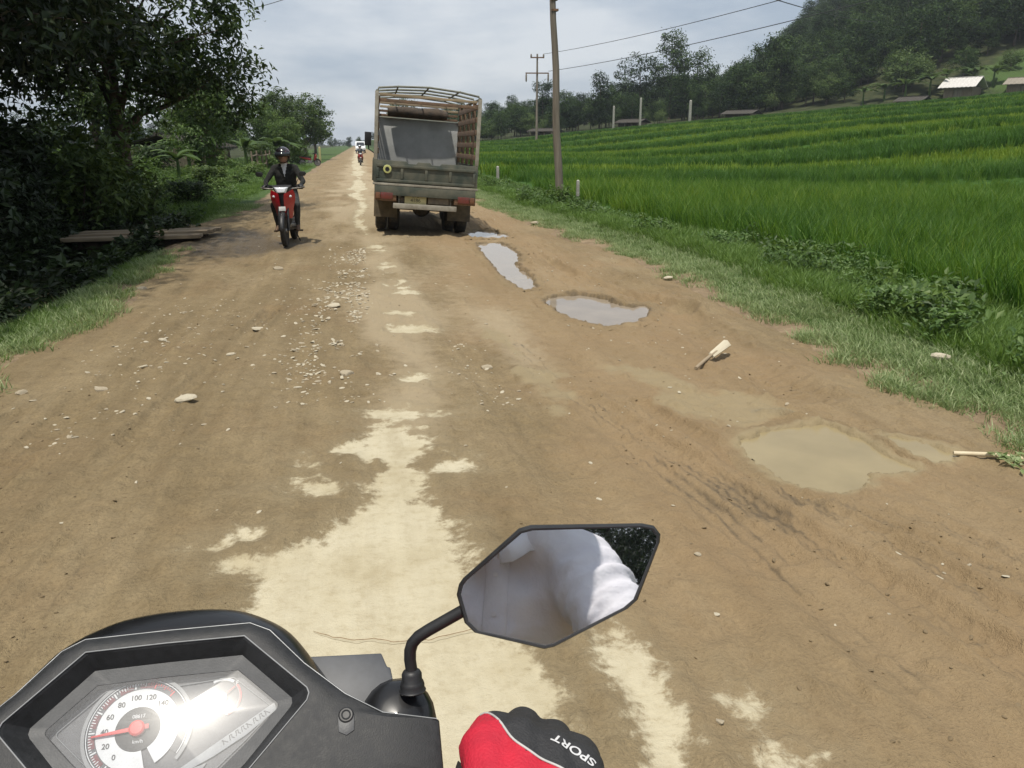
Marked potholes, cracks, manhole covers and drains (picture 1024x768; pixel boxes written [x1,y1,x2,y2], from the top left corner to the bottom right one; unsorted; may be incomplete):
crack [313,628,473,644]
pothole [718,411,942,504]
pothole [467,241,548,292]
pothole [459,228,515,240]
pothole [530,289,665,331]
